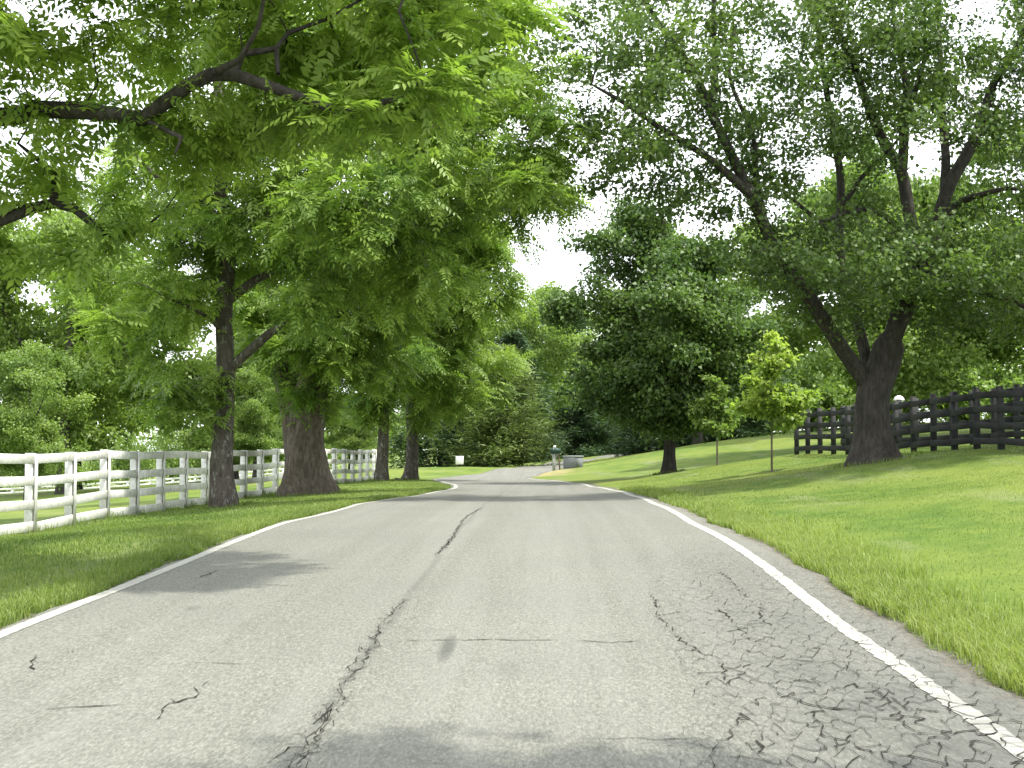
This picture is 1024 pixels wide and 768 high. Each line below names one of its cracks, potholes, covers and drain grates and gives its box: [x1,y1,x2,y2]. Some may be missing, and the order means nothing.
crack [434,508,482,555]
crack [269,601,405,768]
crack [657,553,1024,768]
crack [156,662,237,720]
